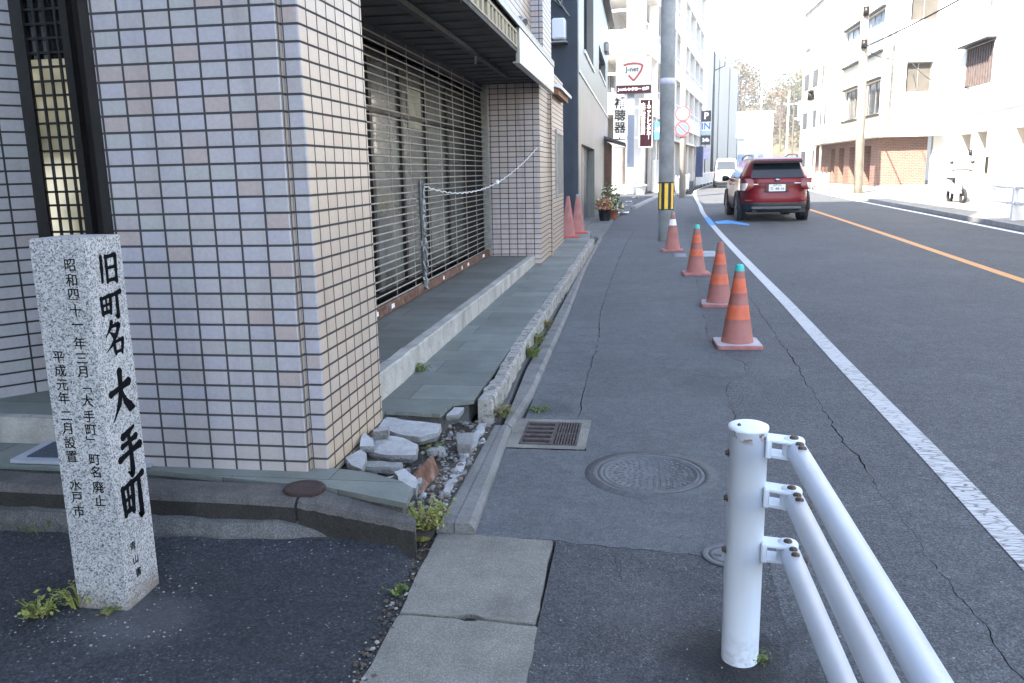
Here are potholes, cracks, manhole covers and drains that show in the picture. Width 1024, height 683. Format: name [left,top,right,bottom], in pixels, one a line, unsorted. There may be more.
manhole cover [701,543,725,567]
drain grate [506,418,592,451]
manhole cover [585,451,719,500]
